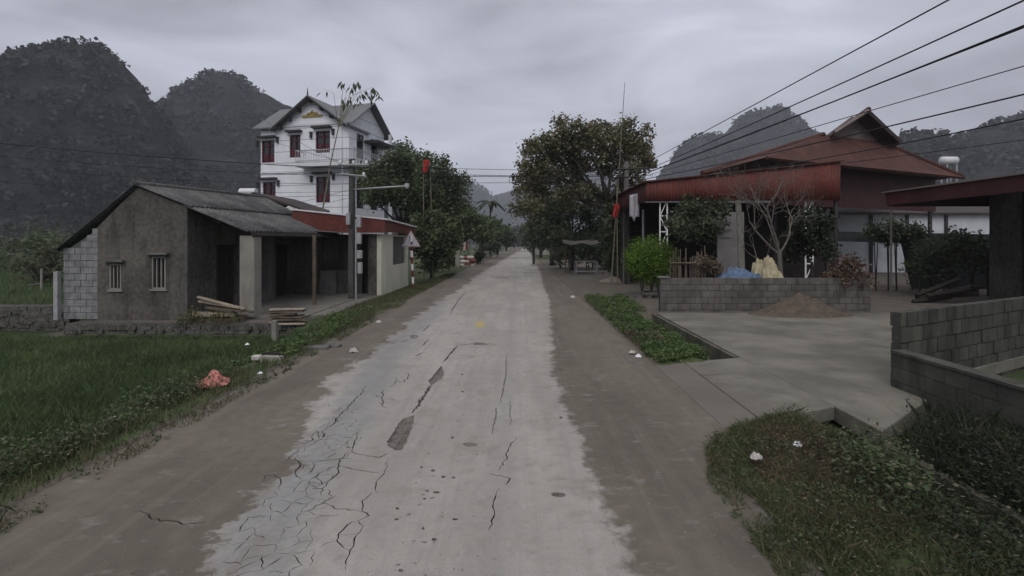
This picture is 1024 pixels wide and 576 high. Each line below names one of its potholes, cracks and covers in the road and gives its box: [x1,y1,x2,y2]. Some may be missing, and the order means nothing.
crack [211,374,431,576]
pothole [387,415,415,450]
crack [489,355,517,529]
pothole [428,367,444,386]
crack [140,511,206,525]
